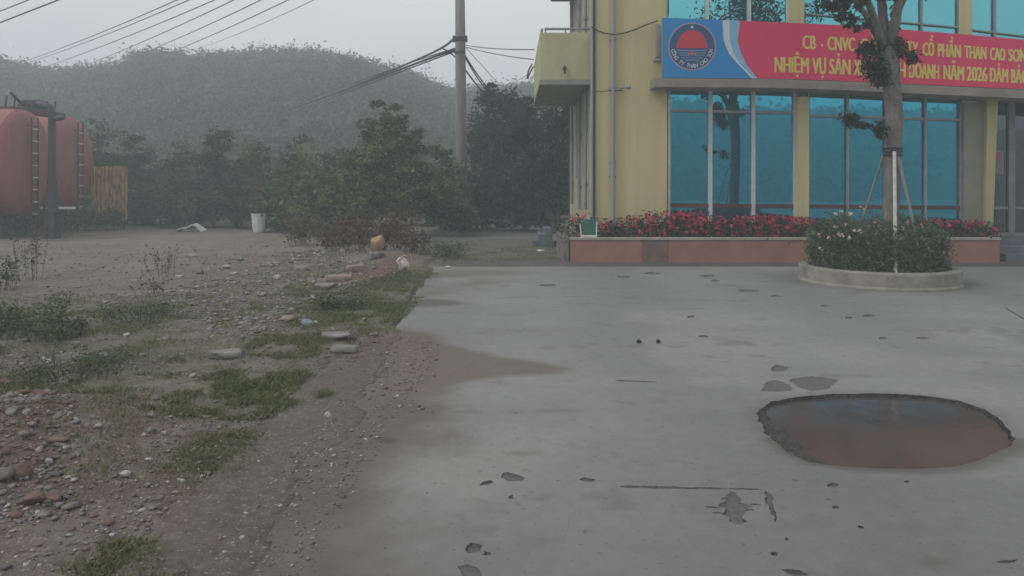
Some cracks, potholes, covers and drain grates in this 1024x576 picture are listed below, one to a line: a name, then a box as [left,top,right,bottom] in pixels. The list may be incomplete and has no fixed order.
pothole [756,393,1016,469]
pothole [458,564,482,576]
pothole [789,376,839,391]
pothole [760,380,792,392]
pothole [501,472,525,482]
crack [620,485,762,514]
pothole [465,542,482,554]
